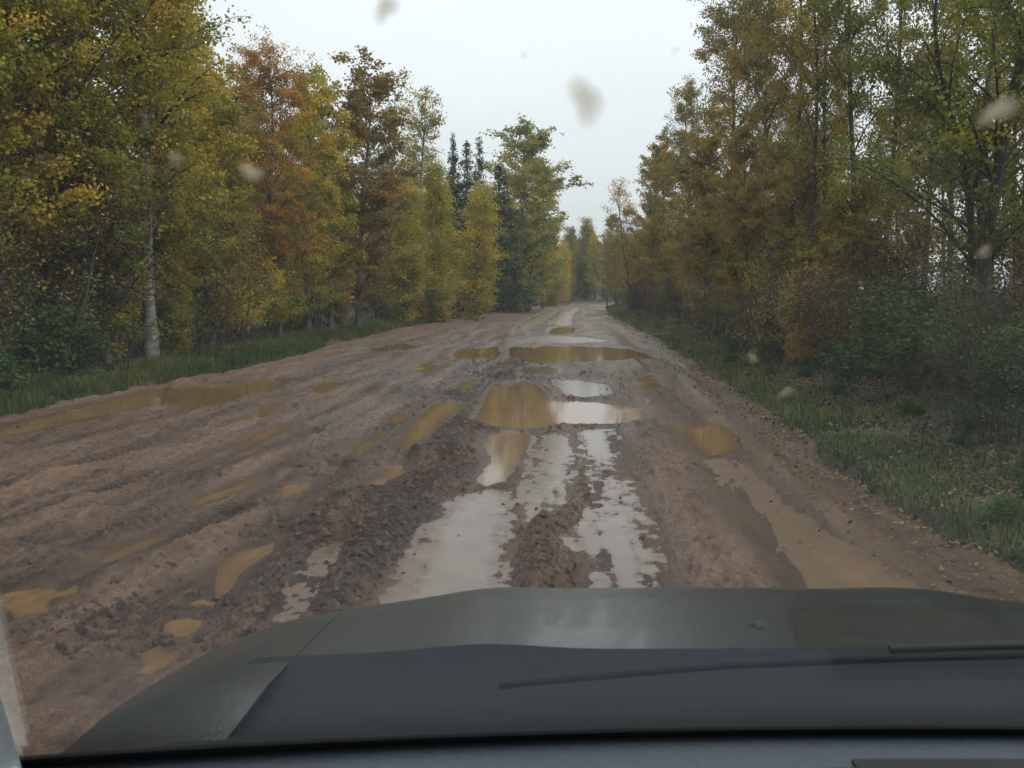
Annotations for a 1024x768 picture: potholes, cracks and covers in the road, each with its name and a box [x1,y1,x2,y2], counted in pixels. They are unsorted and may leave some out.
pothole [183,531,297,600]
pothole [463,428,545,489]
pothole [0,579,97,624]
pothole [103,638,198,681]
pothole [547,326,580,334]
pothole [162,375,290,412]
pothole [448,346,486,360]
pothole [503,343,657,363]
pothole [664,420,757,458]
pothole [467,378,656,430]
pothole [384,397,473,453]
